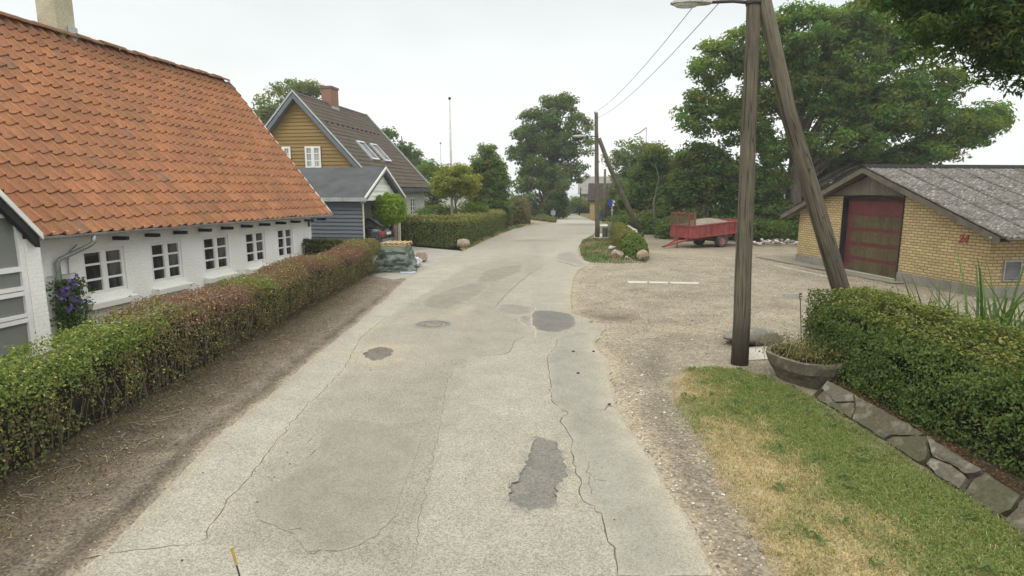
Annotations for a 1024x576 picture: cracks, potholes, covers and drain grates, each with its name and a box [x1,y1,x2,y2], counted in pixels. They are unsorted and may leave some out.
crack [80,318,385,560]
manhole cover [414,320,452,329]
